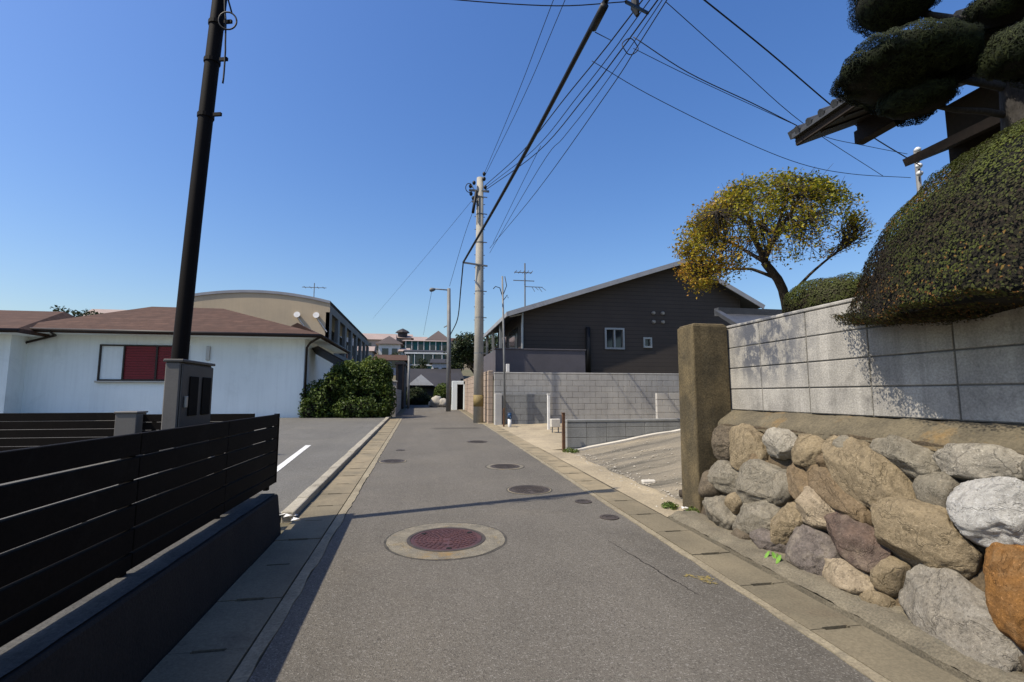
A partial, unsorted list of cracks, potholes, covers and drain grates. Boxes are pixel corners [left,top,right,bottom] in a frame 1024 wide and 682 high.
manhole cover [384,522,507,561]
crack [609,541,697,594]
manhole cover [506,485,553,495]
